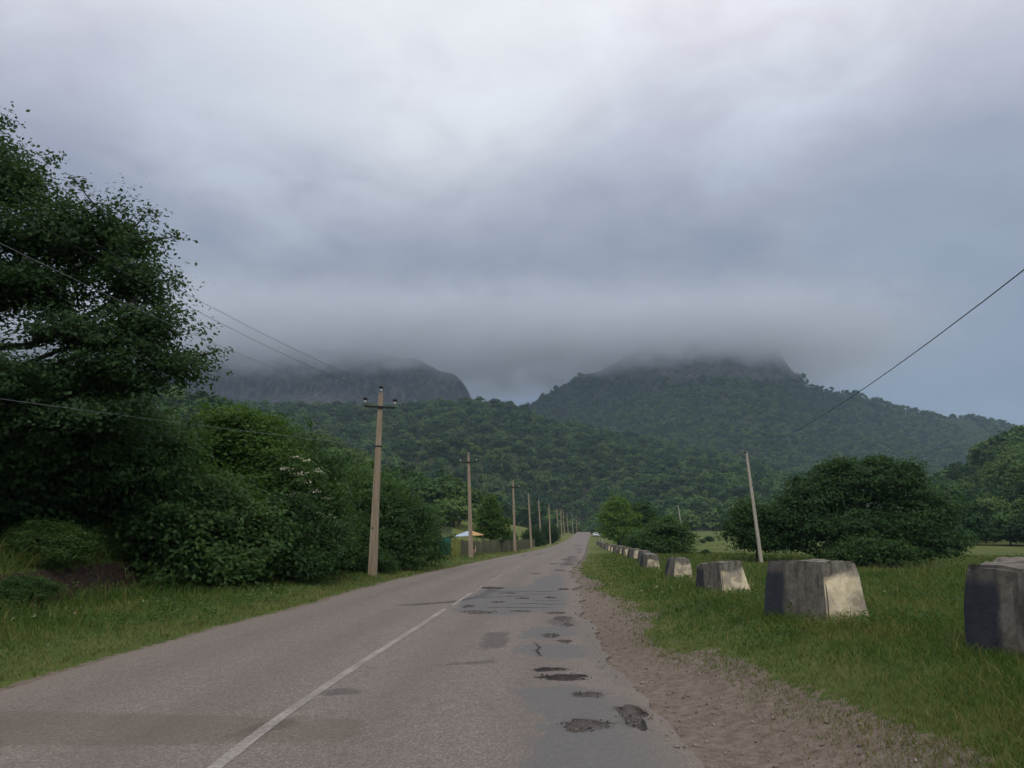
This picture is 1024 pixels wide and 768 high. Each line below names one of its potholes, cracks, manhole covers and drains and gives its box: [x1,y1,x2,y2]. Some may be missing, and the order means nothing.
pothole [614,704,652,731]
pothole [557,718,615,732]
pothole [532,672,592,681]
